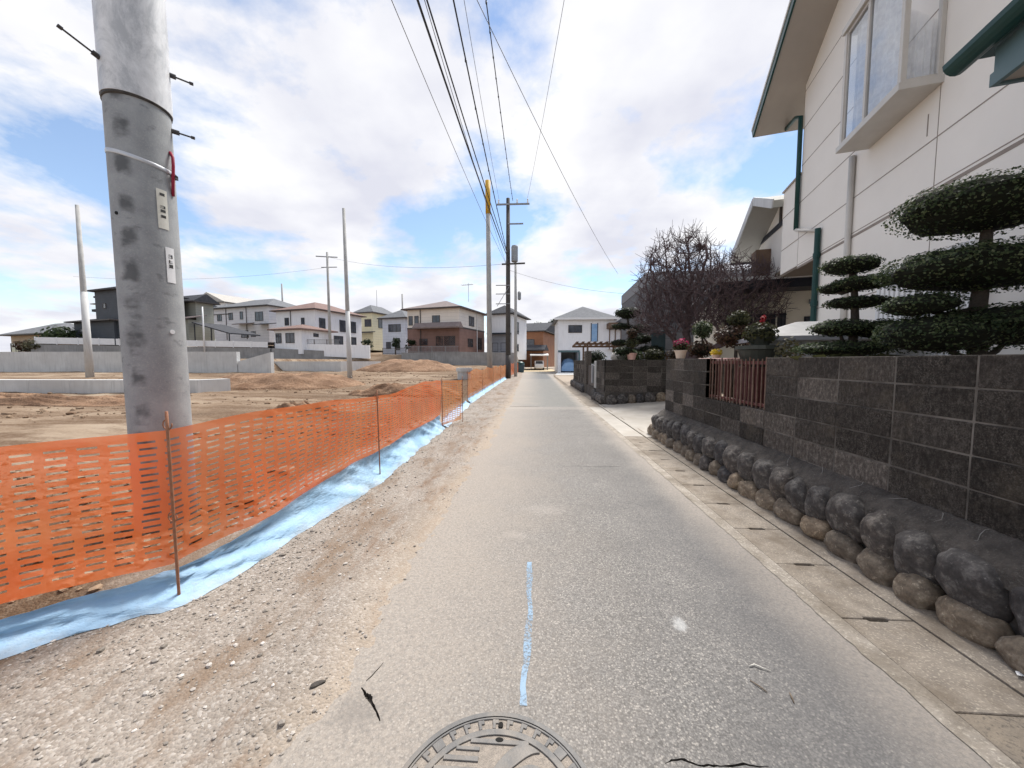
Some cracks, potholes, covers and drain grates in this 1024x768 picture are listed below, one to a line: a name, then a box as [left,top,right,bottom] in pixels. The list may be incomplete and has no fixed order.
crack [665,758,769,768]
manhole cover [403,712,587,768]
crack [361,662,384,721]
